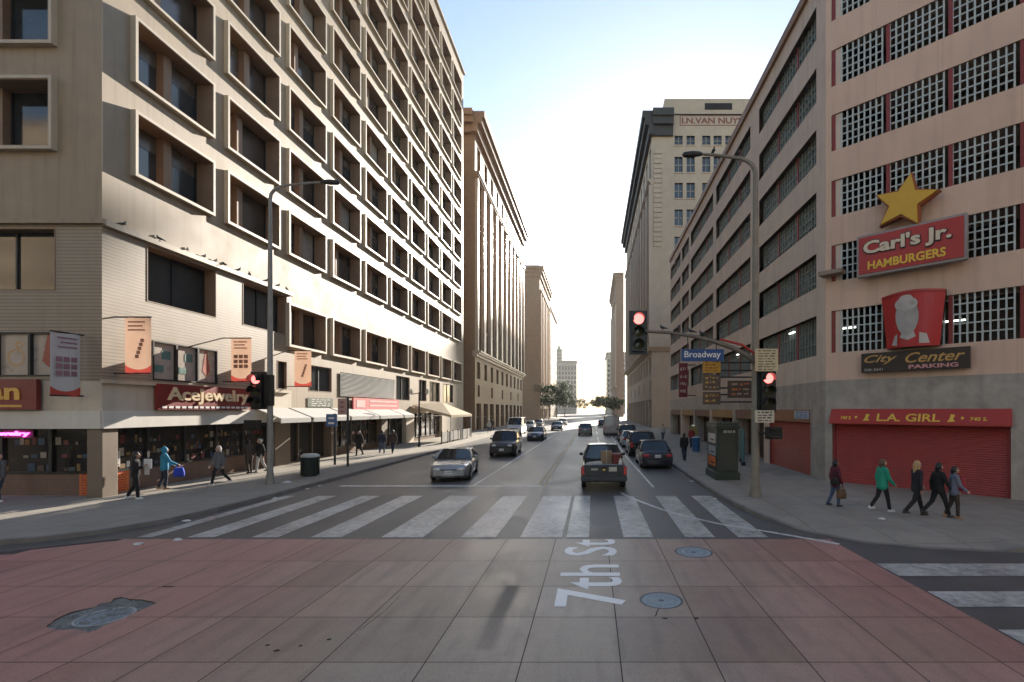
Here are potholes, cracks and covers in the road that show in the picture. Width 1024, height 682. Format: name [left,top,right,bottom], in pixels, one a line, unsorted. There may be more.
manhole cover [639,592,683,609]
manhole cover [674,547,713,558]
